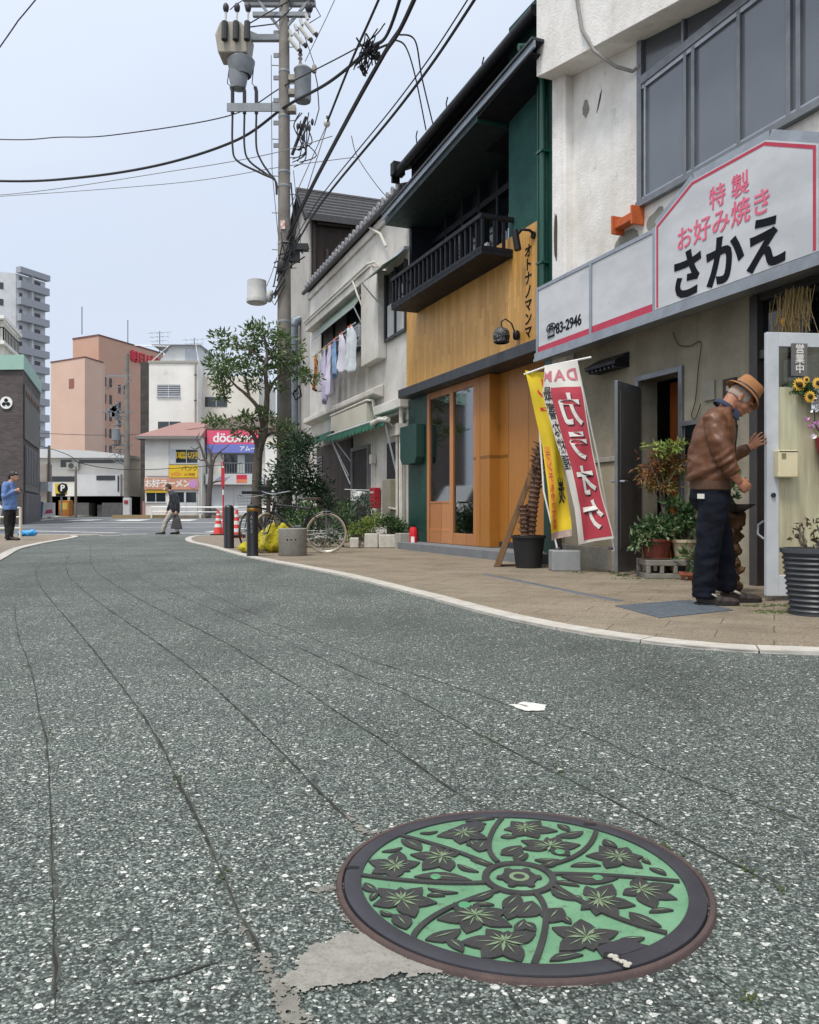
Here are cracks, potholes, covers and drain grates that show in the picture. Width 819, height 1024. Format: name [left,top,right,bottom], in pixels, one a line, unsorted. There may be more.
manhole cover [336,810,717,988]
crack [3,609,65,1016]
